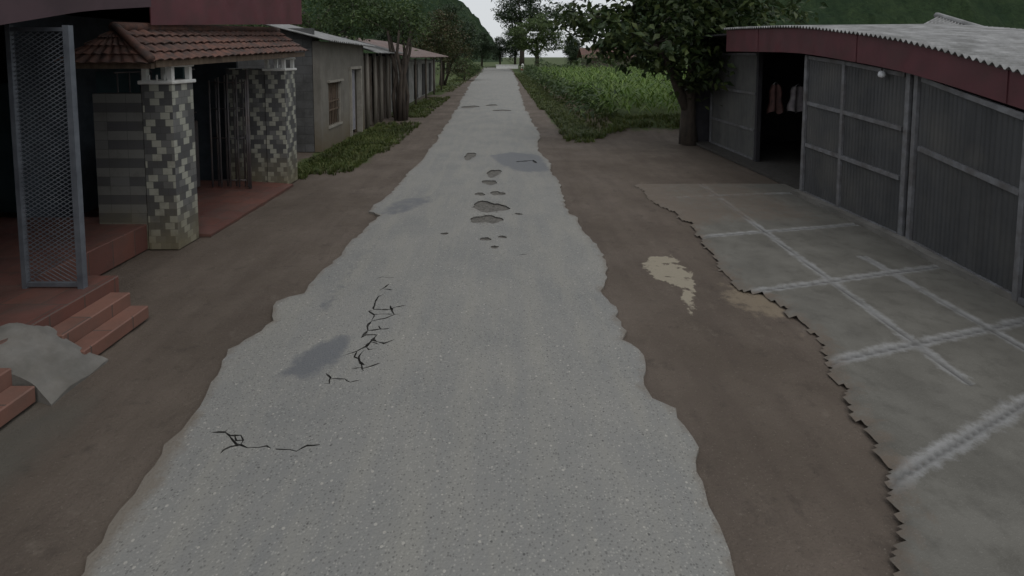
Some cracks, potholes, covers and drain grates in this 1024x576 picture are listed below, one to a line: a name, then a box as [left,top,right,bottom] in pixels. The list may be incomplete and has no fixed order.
crack [211,431,319,454]
pothole [474,201,511,213]
crack [324,277,405,384]
pothole [471,215,503,223]
